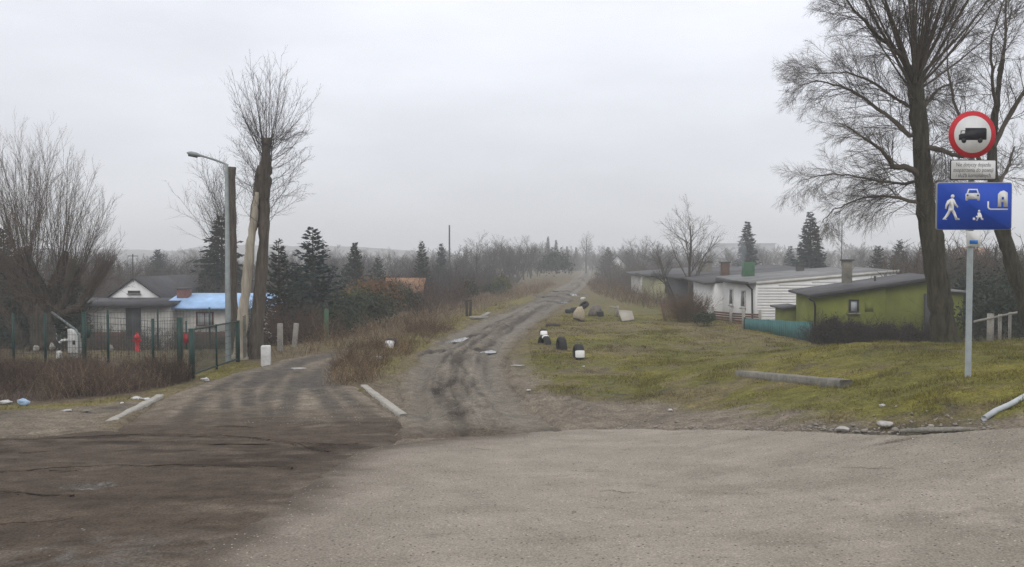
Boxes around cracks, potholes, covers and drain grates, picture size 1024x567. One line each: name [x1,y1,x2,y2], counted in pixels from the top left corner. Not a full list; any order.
crack [0,425,358,500]
